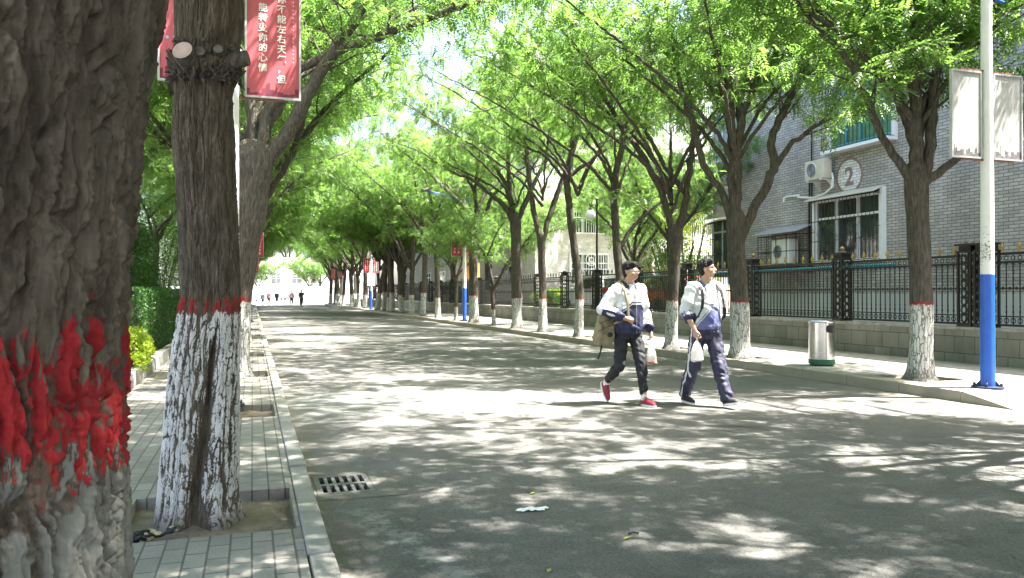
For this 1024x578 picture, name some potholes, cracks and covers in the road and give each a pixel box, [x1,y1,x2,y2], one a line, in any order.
drain grate [309,470,406,501]
